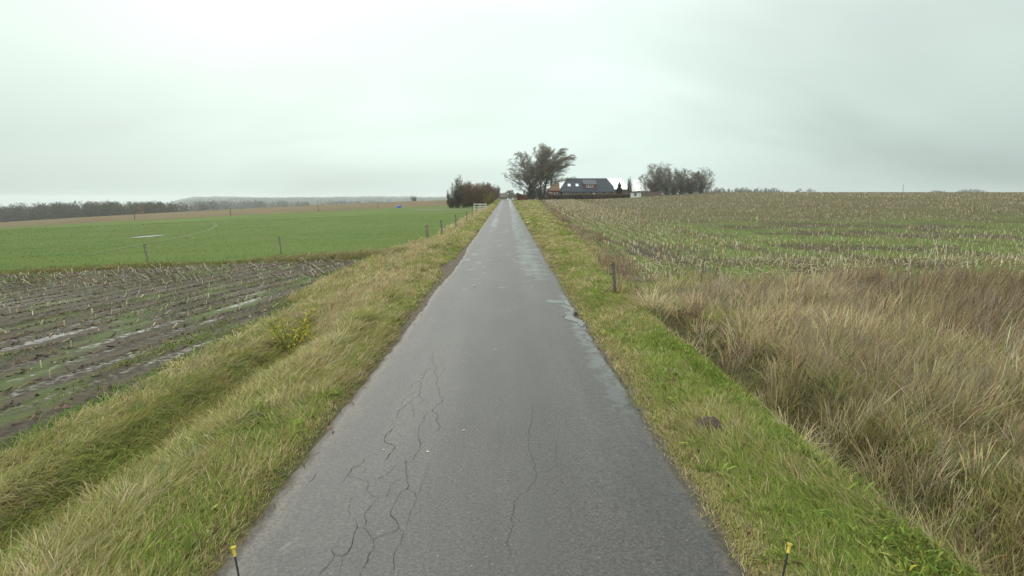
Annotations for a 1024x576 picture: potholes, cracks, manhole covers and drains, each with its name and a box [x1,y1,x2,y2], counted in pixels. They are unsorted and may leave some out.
crack [321,359,443,575]
